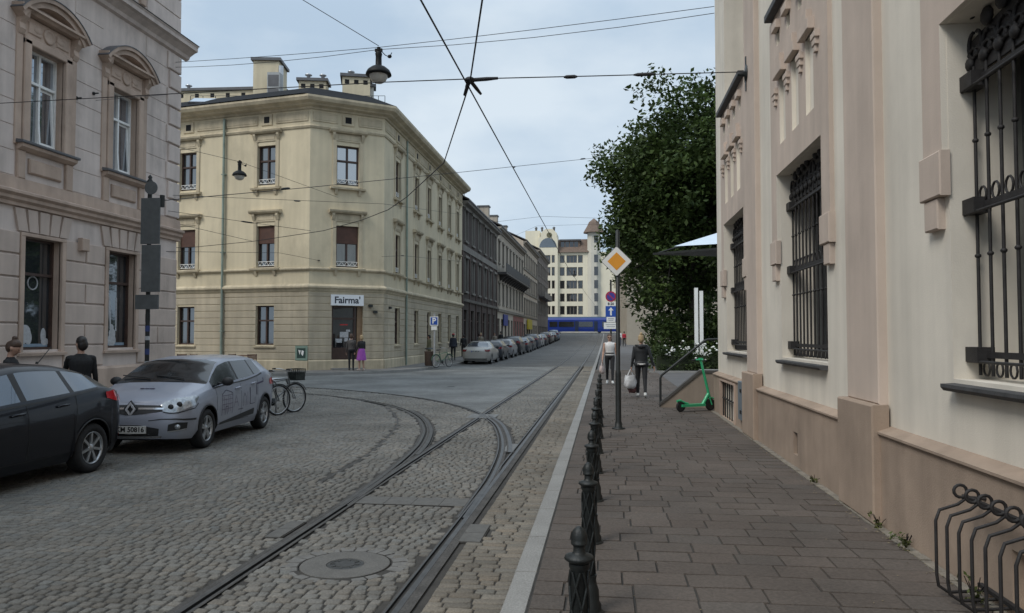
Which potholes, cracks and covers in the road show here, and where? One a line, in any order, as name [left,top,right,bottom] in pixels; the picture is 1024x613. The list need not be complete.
manhole cover [280,547,409,584]
